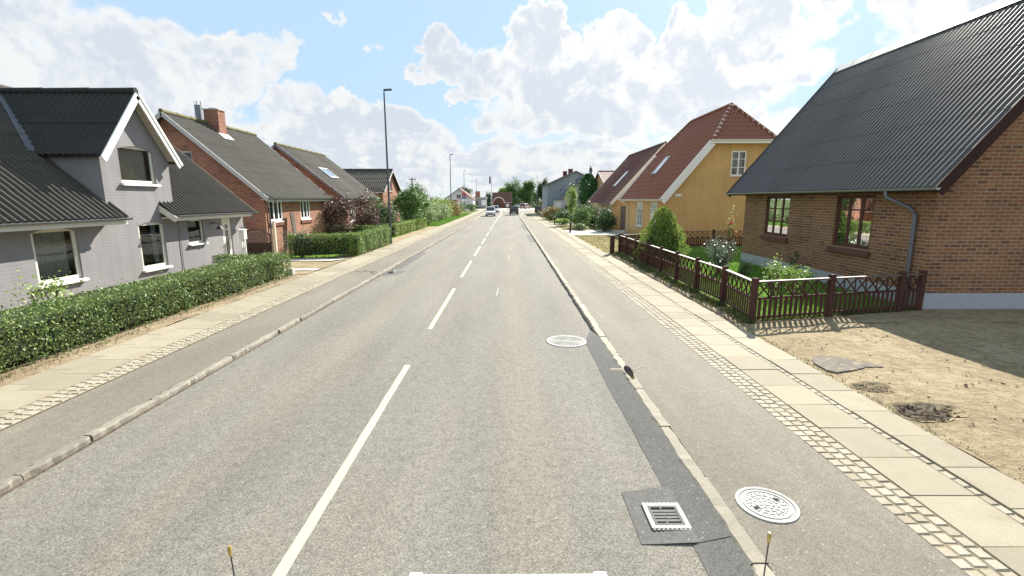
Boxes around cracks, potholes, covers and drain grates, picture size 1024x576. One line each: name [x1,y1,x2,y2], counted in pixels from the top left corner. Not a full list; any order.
manhole cover [735,487,801,524]
drain grate [641,502,692,531]
manhole cover [546,335,587,347]
